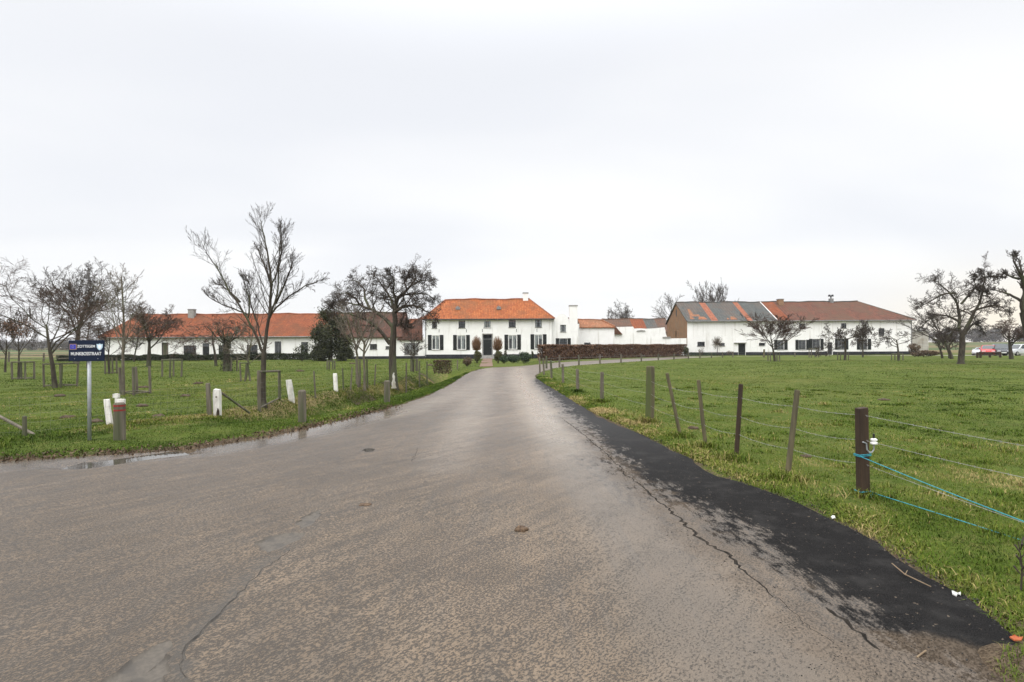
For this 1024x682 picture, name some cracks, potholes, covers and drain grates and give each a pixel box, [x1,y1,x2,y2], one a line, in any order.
crack [562,418,880,650]
